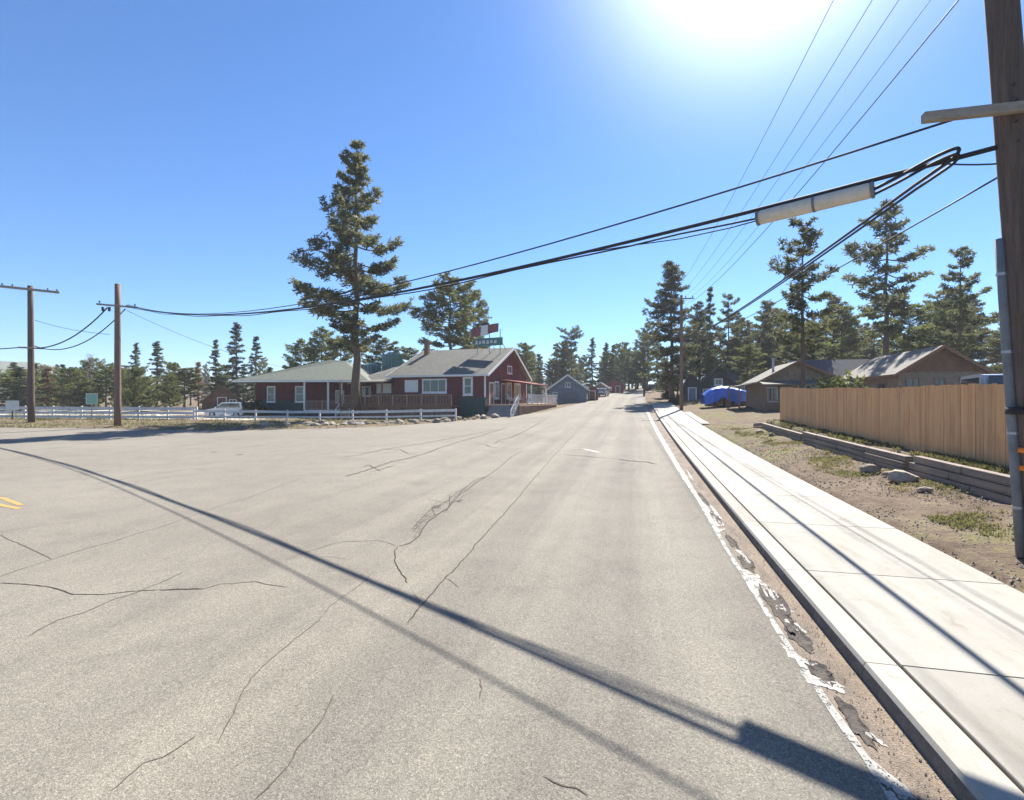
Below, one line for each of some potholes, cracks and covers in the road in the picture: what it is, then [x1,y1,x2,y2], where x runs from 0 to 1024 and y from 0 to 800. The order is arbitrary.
crack [112,736,195,790]
pothole [834,696,878,750]
crack [543,775,588,795]
pothole [737,554,756,573]
crack [289,422,540,604]
pothole [808,660,836,686]
crack [218,574,371,800]
crack [8,573,286,636]
pothole [784,622,813,654]
pothole [758,583,796,634]
